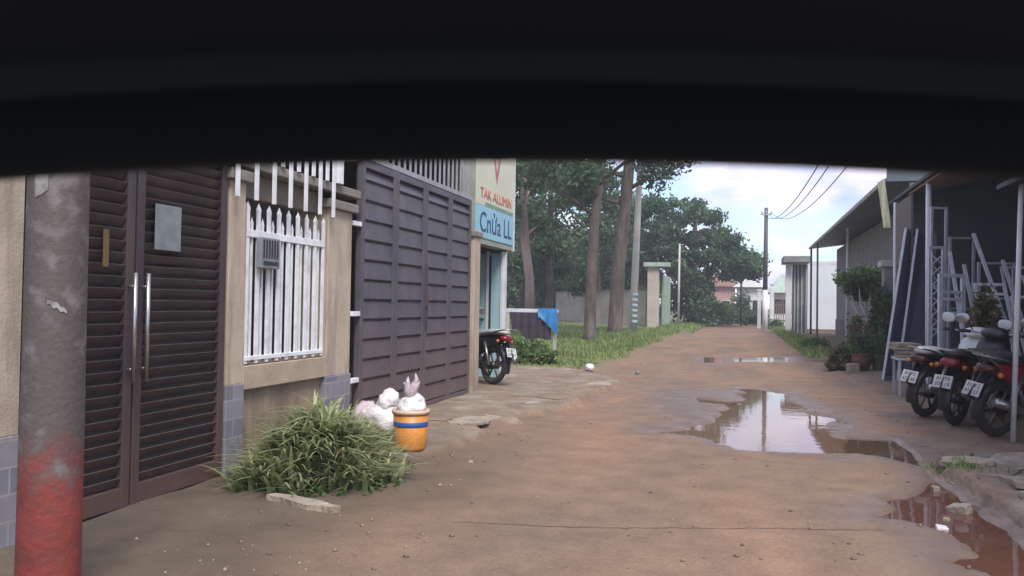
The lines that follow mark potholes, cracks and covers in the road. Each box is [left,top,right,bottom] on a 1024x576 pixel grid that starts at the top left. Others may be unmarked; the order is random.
pothole [846,435,926,466]
pothole [870,470,1024,576]
pothole [650,386,853,452]
